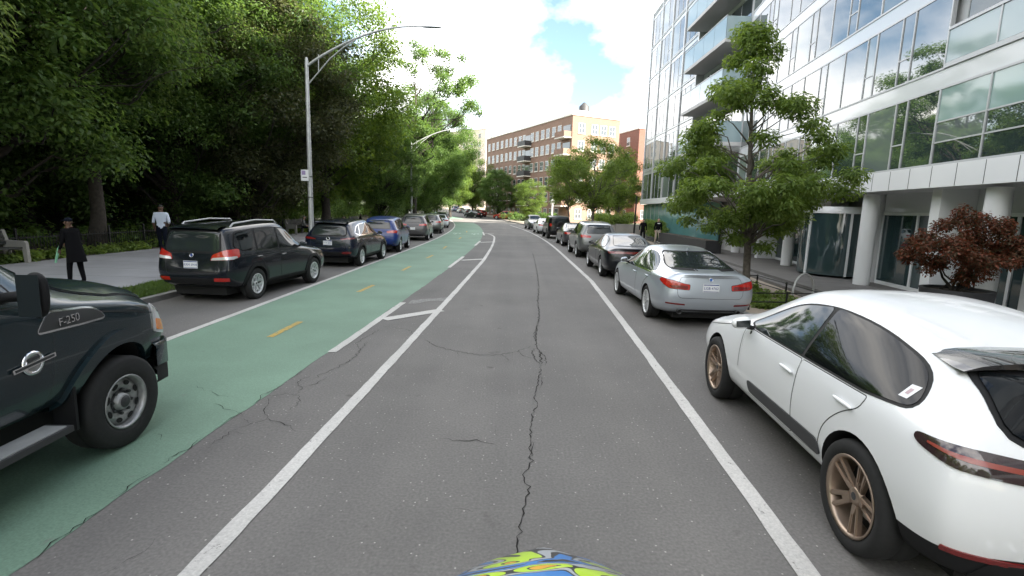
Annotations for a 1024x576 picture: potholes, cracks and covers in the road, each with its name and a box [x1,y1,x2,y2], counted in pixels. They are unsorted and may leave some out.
crack [32,326,386,561]
crack [425,257,547,553]
